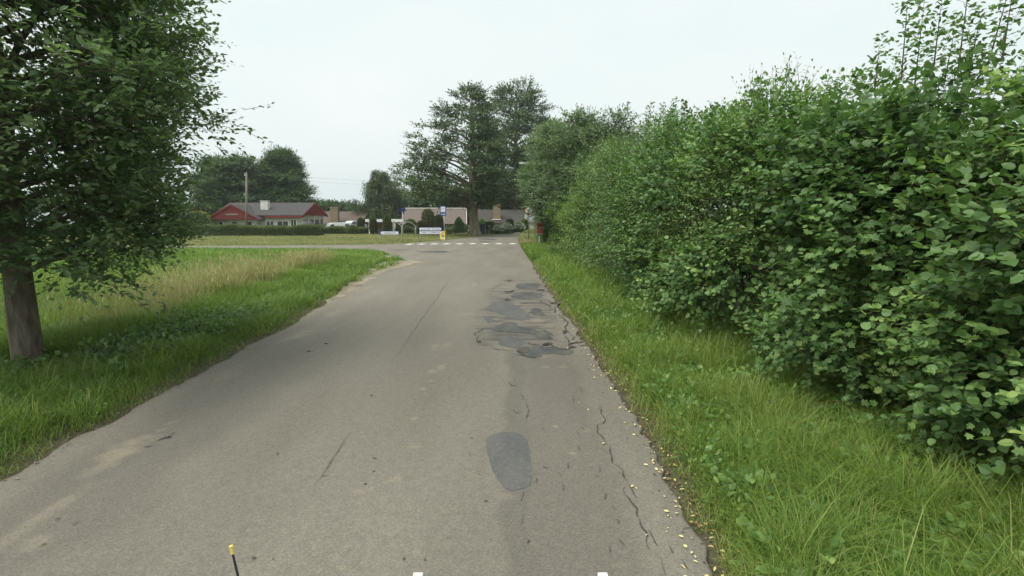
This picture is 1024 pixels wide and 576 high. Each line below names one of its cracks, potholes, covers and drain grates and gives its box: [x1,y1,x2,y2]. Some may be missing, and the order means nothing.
crack [521,404,688,573]
crack [474,283,584,358]
